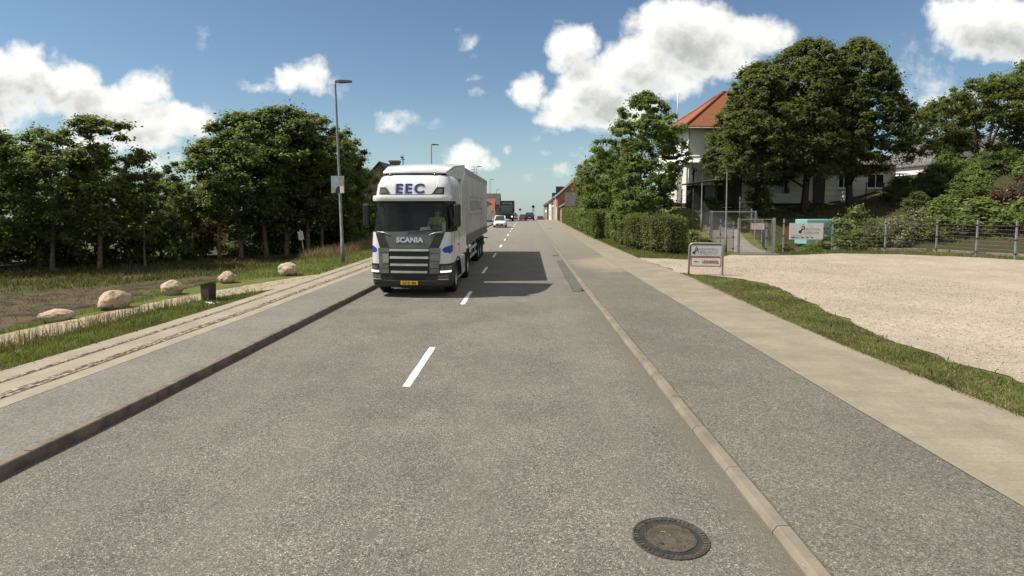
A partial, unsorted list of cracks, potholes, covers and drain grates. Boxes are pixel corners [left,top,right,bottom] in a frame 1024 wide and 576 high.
manhole cover [632,517,710,561]
